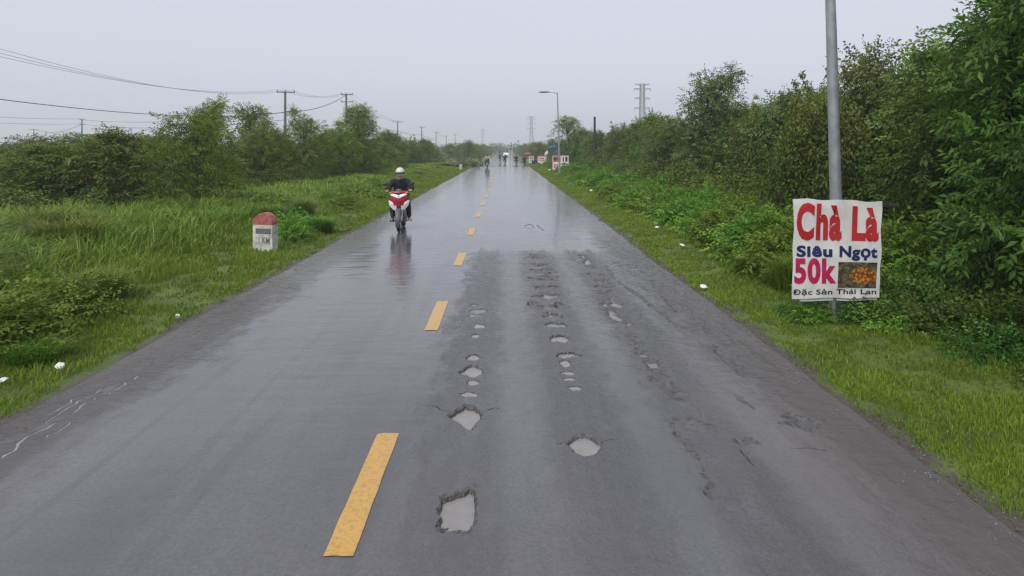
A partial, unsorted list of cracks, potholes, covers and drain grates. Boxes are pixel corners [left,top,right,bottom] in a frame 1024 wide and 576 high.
pothole [555,351,582,359]
crack [668,394,755,501]
pothole [549,334,571,343]
crack [0,374,141,459]
pothole [565,433,604,457]
pothole [447,403,484,432]
pothole [435,483,479,534]
pothole [458,364,485,378]
